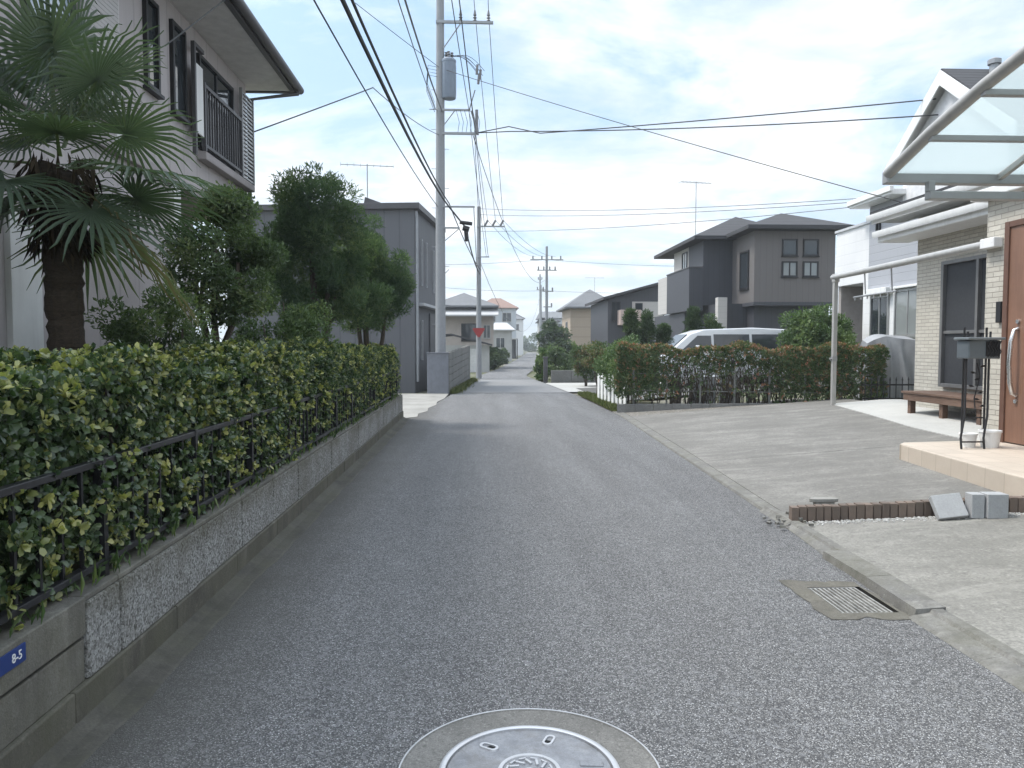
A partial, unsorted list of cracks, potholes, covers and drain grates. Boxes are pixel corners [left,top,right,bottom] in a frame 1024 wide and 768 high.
manhole cover [398,708,660,768]
drain grate [779,580,910,620]
